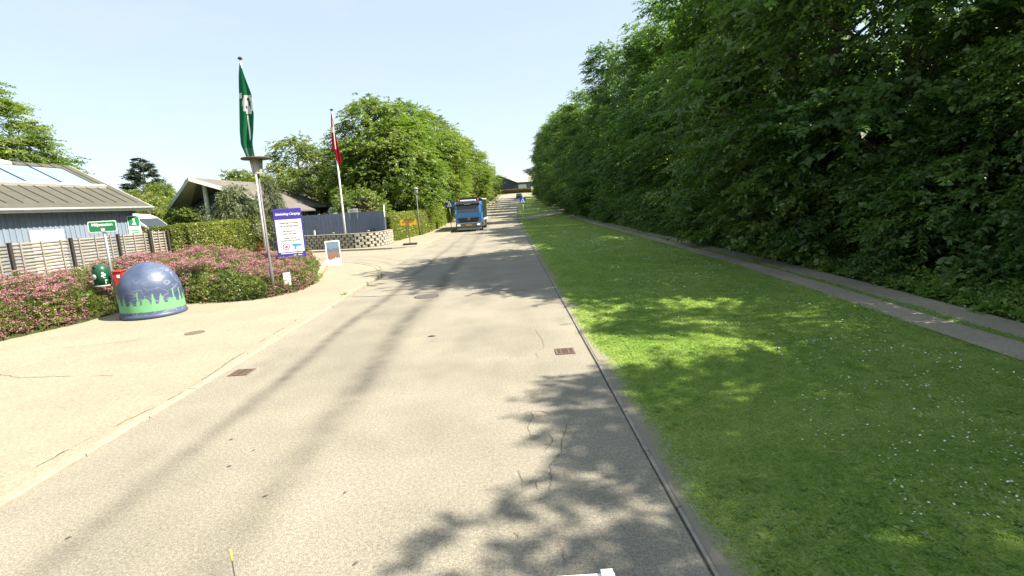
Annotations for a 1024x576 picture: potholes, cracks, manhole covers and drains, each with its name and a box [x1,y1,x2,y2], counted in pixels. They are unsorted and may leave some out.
crack [29,320,296,470]
drain grate [555,347,576,355]
crack [514,332,567,559]
drain grate [228,368,256,376]
